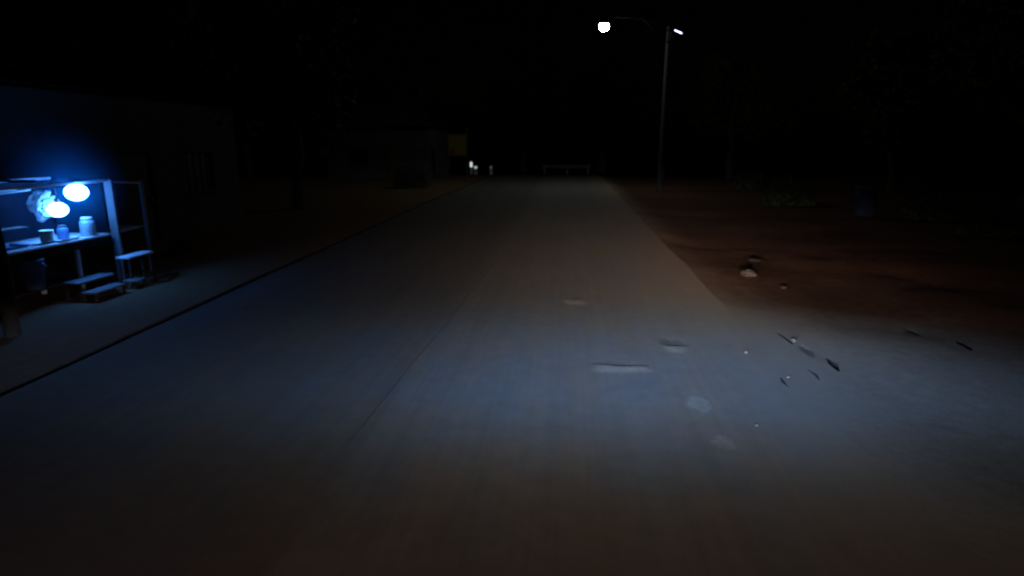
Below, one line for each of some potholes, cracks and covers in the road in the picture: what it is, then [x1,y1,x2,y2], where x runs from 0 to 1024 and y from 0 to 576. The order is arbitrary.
pothole [587,359,657,375]
pothole [656,335,690,354]
pothole [561,297,591,306]
pothole [797,345,816,358]
